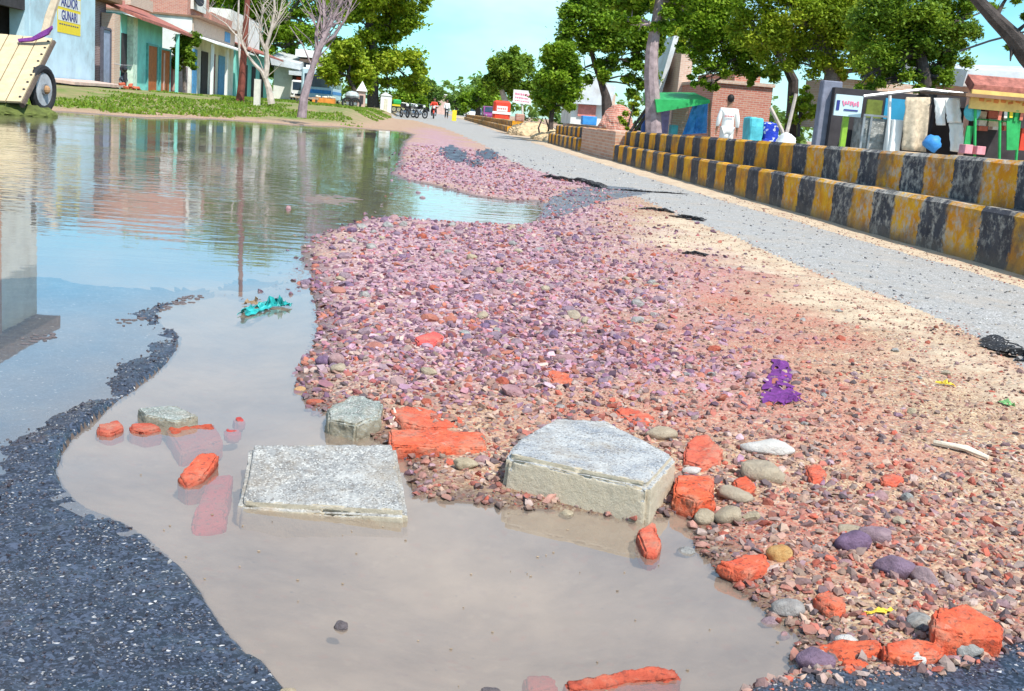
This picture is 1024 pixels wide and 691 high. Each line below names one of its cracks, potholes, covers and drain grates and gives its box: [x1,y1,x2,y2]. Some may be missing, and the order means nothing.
crack [538,174,707,221]
pothole [57,293,802,691]
